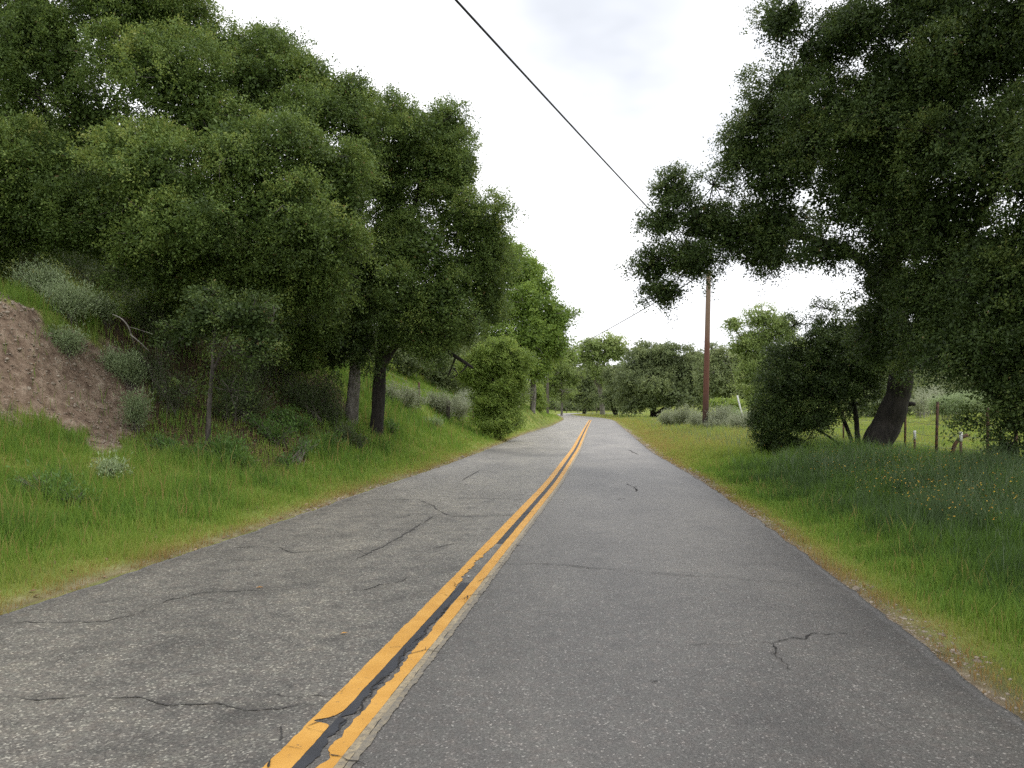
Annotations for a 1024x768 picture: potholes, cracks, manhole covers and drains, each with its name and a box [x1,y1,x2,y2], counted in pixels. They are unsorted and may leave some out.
crack [673,632,838,668]
crack [25,600,452,737]
crack [338,469,504,559]
crack [22,590,241,623]
